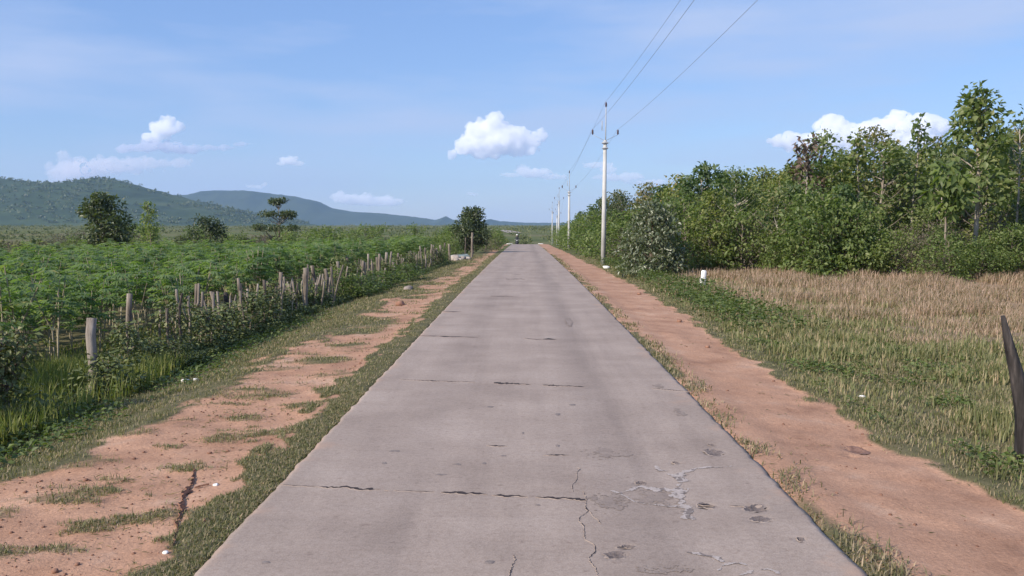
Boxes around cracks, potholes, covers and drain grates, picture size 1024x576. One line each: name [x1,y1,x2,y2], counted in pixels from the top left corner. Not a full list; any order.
crack [543,454,731,576]
pothole [700,448,726,457]
pothole [741,503,770,513]
